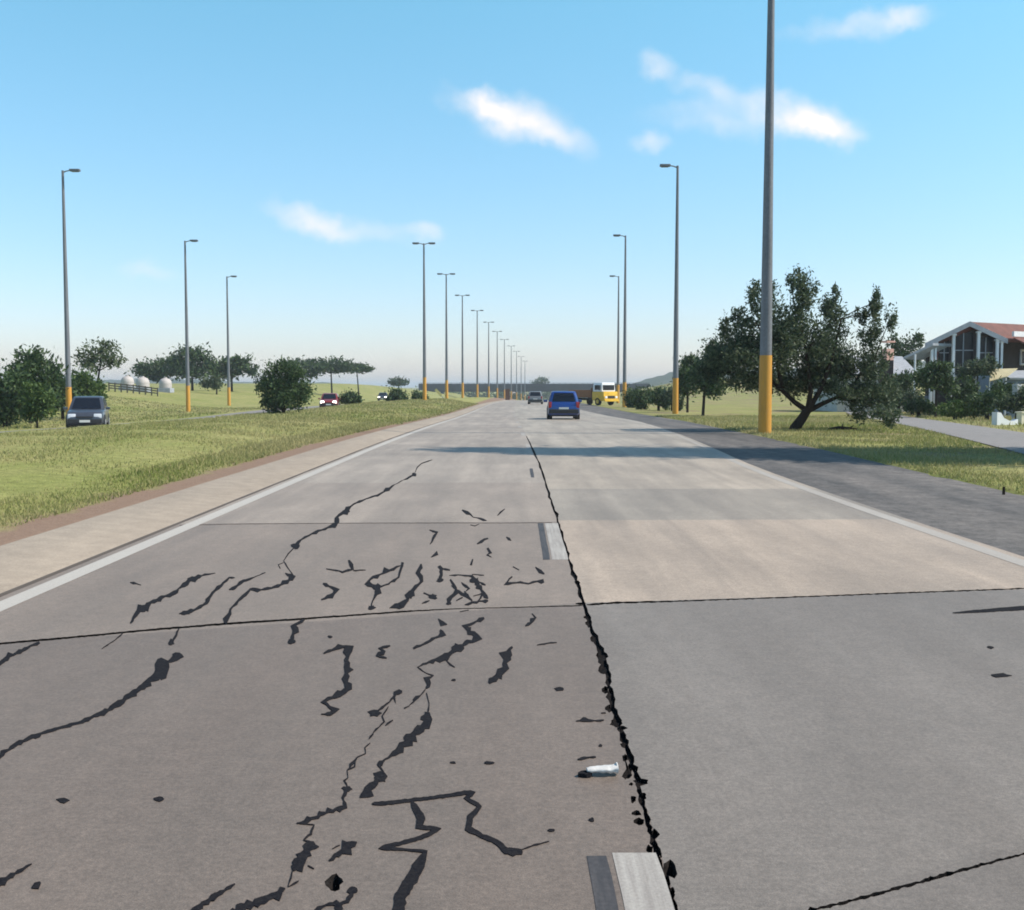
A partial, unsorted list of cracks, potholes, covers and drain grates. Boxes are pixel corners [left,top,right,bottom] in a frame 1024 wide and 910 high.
crack [0,863,41,890]
crack [191,436,1024,910]
pothole [325,873,343,891]
